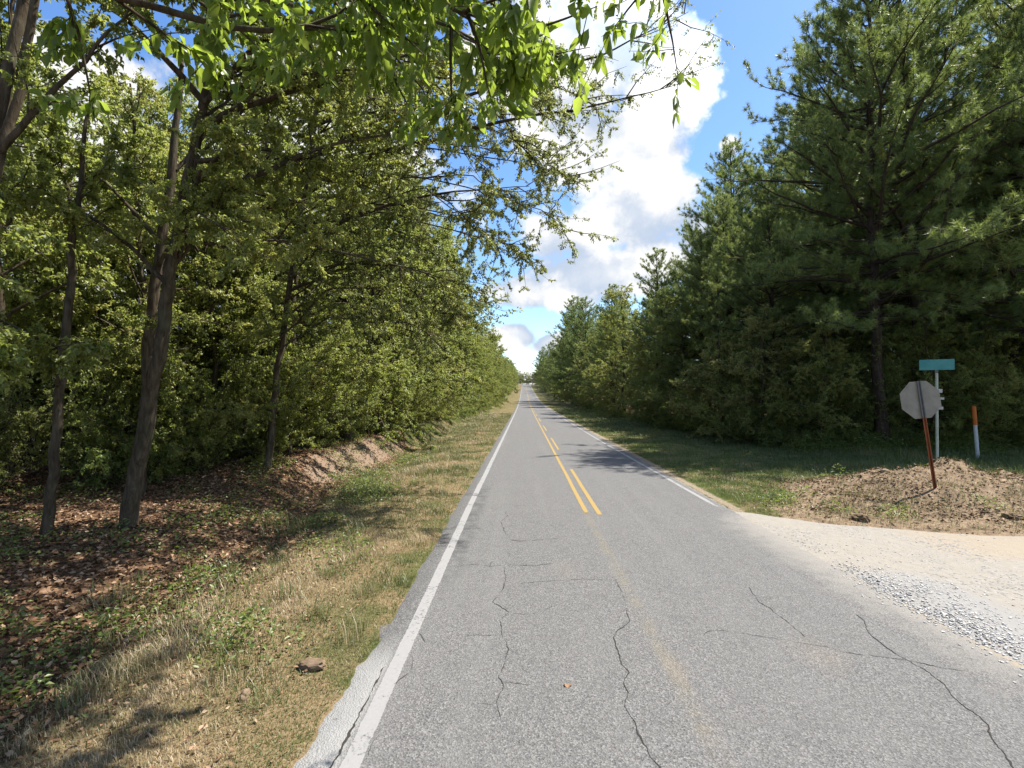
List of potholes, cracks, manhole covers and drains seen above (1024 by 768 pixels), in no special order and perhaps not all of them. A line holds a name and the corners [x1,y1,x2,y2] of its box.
crack [704,589,1014,768]
crack [471,561,576,720]
crack [613,581,661,768]
